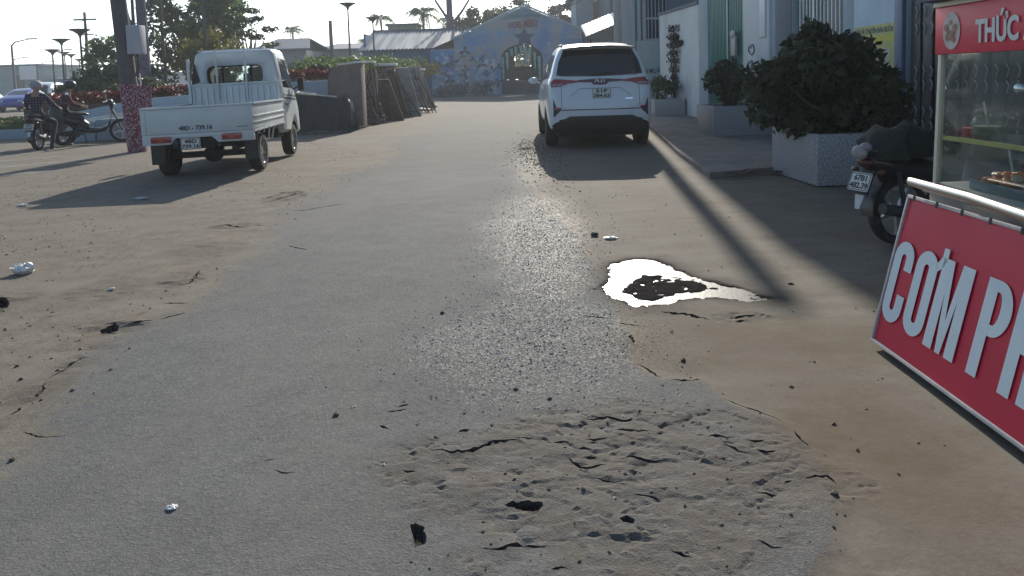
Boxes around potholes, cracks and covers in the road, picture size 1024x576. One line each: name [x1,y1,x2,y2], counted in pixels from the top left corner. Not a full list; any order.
pothole [410,523,427,547]
crack [553,416,663,500]
crack [662,311,710,320]
crack [484,542,568,570]
crack [132,302,184,323]
crack [380,404,408,429]
crack [730,315,755,323]
pothole [505,500,543,511]
crack [431,429,532,454]
crack [10,358,81,415]
